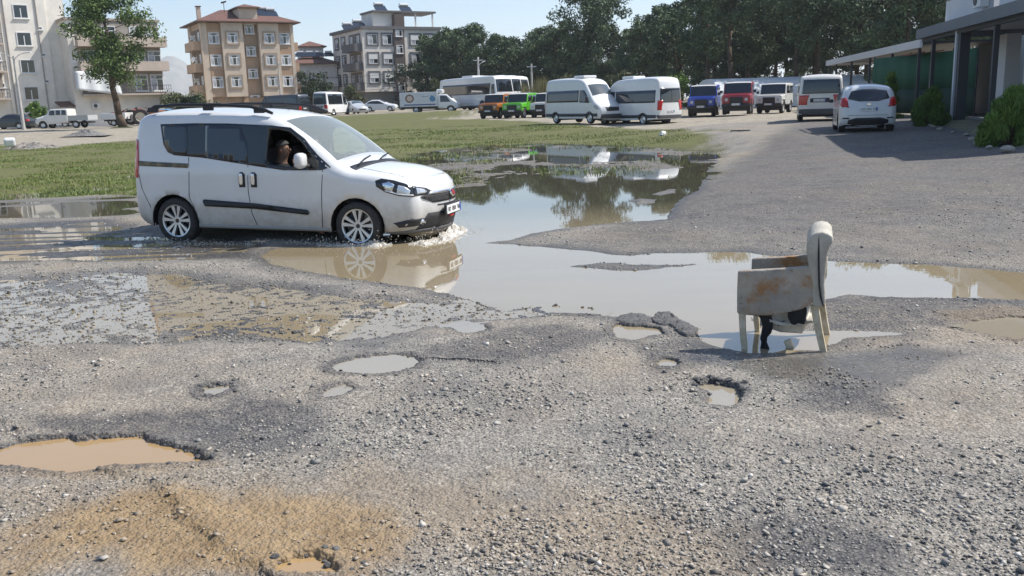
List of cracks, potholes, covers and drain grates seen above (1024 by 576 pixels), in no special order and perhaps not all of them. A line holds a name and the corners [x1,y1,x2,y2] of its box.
pothole [317,350,433,377]
pothole [439,321,498,335]
pothole [947,313,1024,341]
pothole [644,353,693,369]
pothole [602,320,673,343]
pothole [306,378,363,401]
pothole [684,375,756,409]
pothole [0,428,227,478]
pothole [183,378,244,401]
pothole [257,542,366,576]
